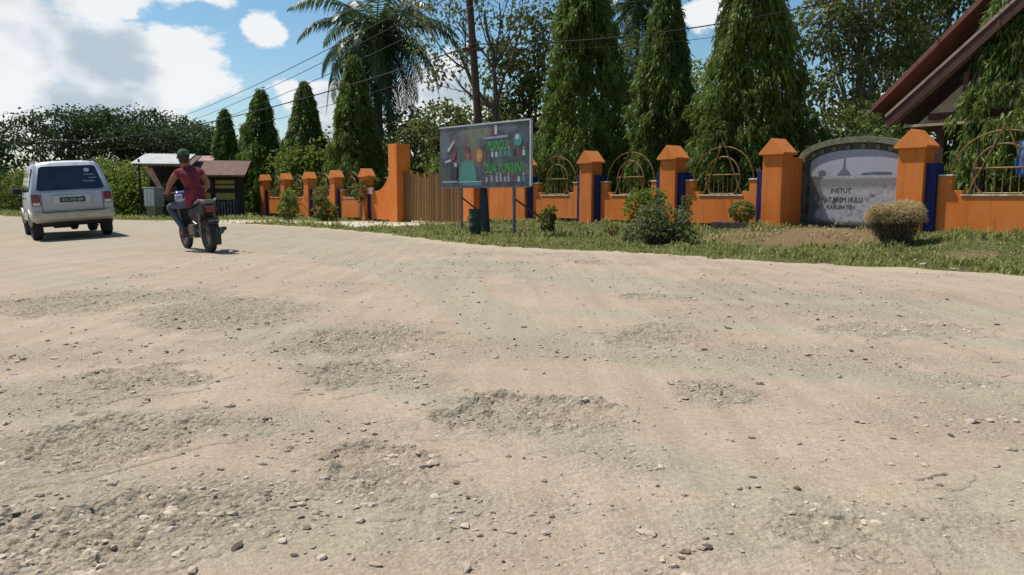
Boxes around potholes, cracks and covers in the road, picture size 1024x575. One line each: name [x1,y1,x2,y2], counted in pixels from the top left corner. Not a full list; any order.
pothole [0,291,143,320]
pothole [101,294,318,334]
pothole [788,317,1004,344]
pothole [0,406,275,490]
pothole [724,498,964,575]
pothole [246,321,466,365]
pothole [572,321,745,353]
pothole [259,353,425,400]
pothole [288,425,479,527]
pothole [47,357,235,406]
pothole [382,384,640,456]
